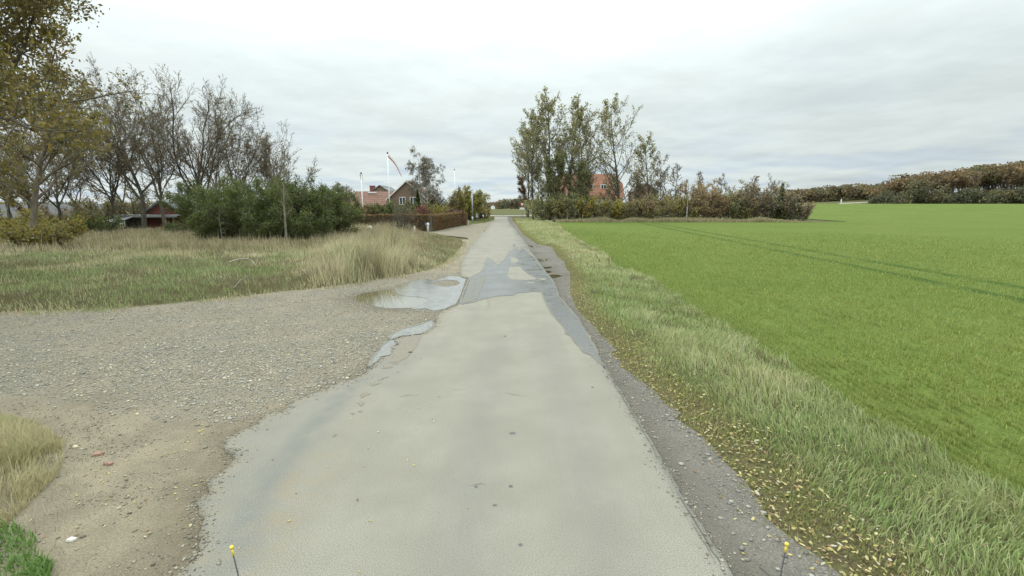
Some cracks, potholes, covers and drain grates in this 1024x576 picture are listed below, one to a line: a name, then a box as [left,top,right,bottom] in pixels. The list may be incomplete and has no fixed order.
pothole [352,289,428,308]
